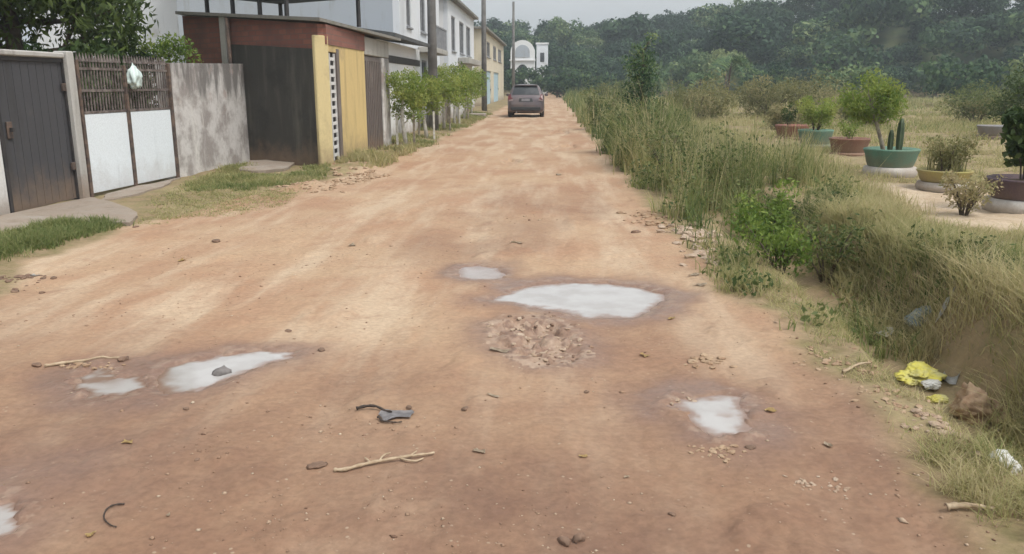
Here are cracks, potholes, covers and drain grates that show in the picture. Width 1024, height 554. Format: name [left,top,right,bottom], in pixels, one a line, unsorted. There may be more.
pothole [49,359,169,406]
pothole [473,277,684,322]
pothole [142,342,307,400]
pothole [654,387,772,443]
pothole [443,260,517,281]
